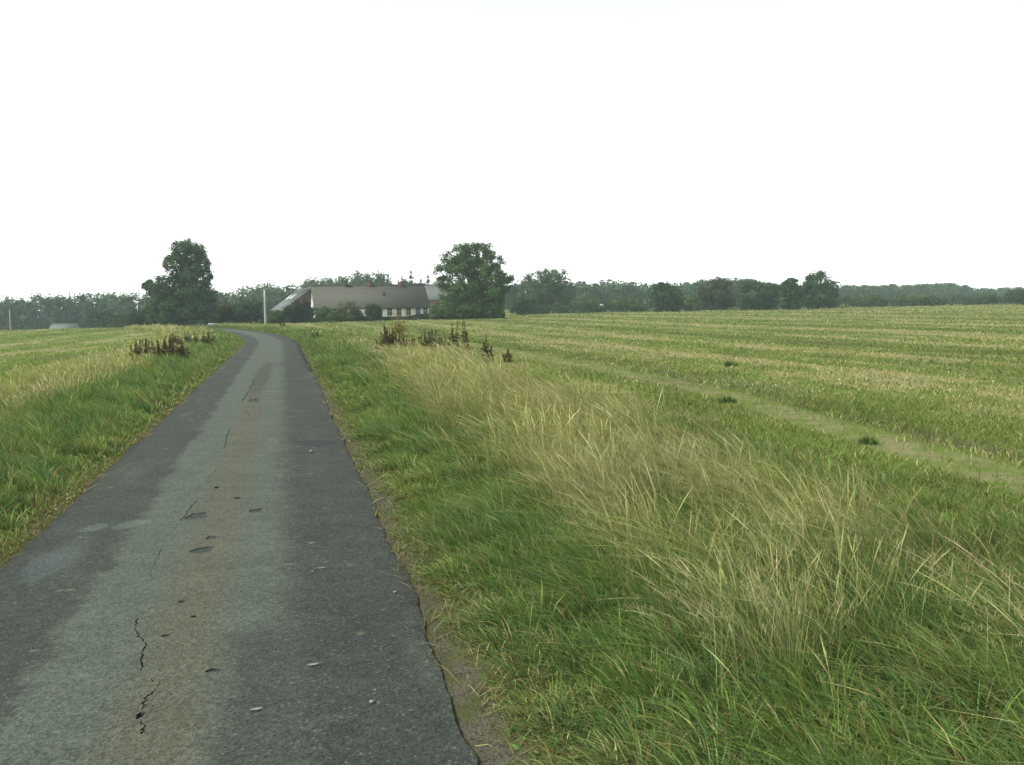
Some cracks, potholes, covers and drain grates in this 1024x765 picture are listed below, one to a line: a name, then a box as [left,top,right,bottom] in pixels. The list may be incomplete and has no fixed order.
pothole [189,546,214,554]
pothole [184,512,208,520]
crack [134,607,160,734]
